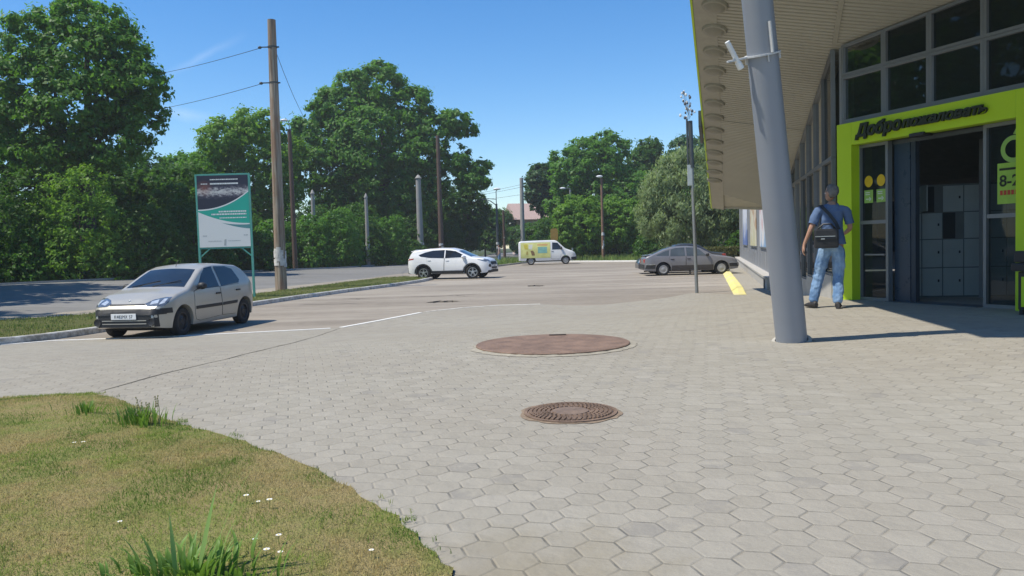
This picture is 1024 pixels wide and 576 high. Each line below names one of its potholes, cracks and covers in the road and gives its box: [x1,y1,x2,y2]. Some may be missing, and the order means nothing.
manhole cover [520,402,623,424]
manhole cover [470,334,638,357]
